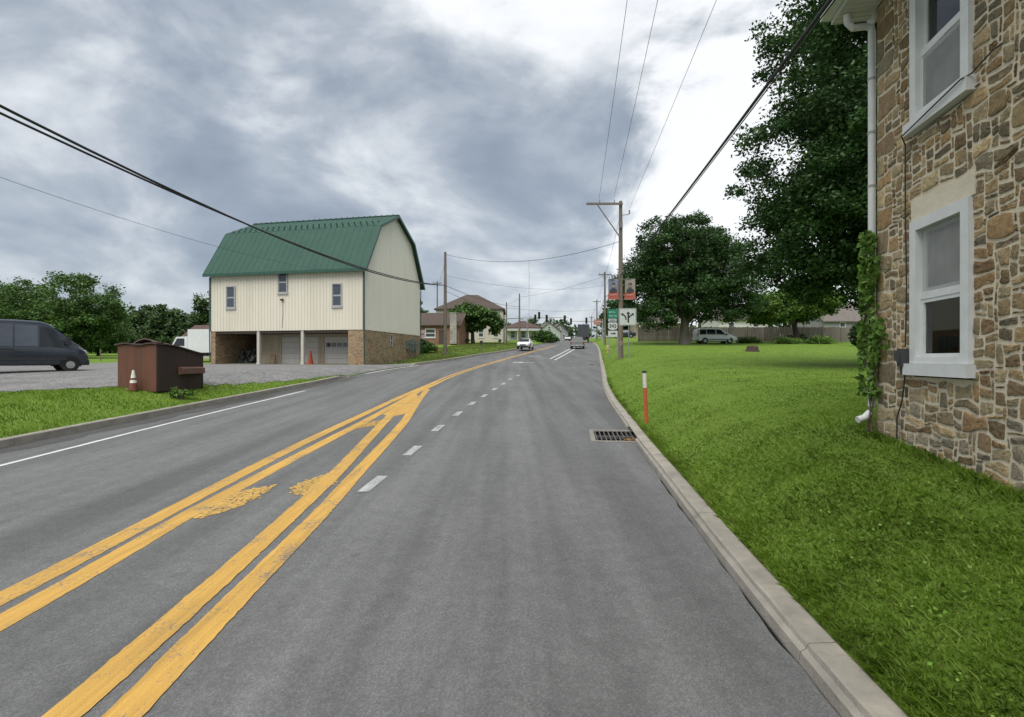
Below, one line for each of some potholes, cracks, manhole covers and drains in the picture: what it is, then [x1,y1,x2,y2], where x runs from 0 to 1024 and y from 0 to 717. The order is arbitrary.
drain grate [589,429,637,443]
